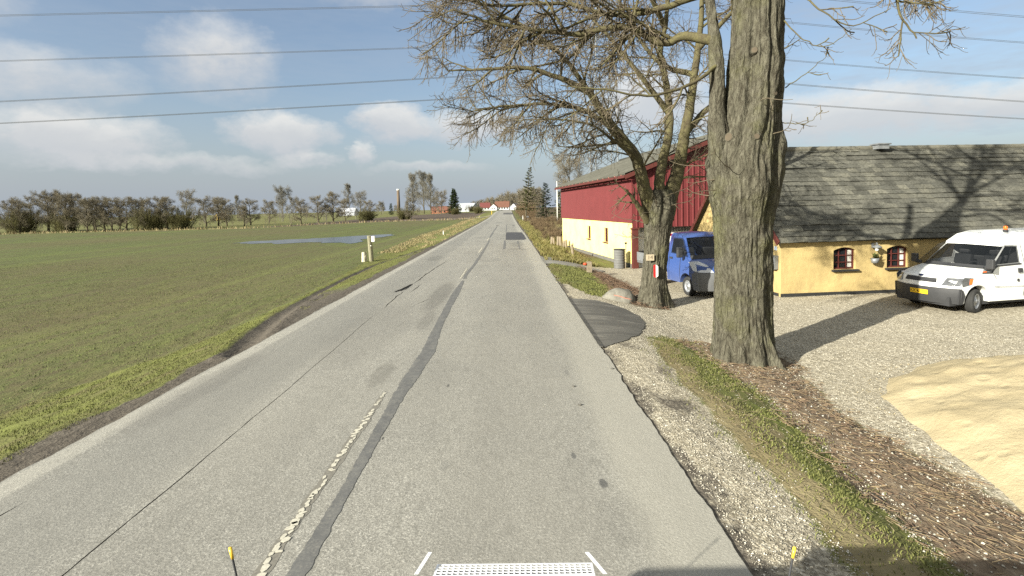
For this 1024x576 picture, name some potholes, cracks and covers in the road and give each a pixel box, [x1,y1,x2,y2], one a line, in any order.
crack [62,262,445,576]
